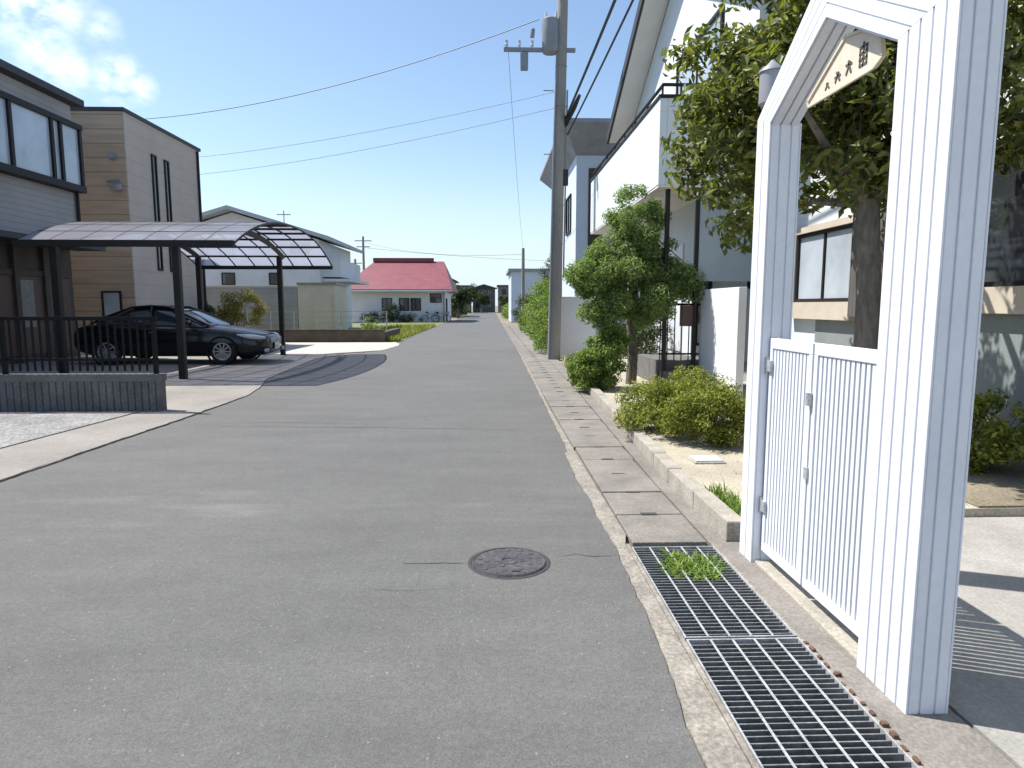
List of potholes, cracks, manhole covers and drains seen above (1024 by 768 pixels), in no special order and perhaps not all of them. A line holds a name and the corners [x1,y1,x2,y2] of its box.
drain grate [686,637,921,768]
drain grate [632,546,797,641]
manhole cover [468,547,551,580]
utility cover [687,455,726,464]
